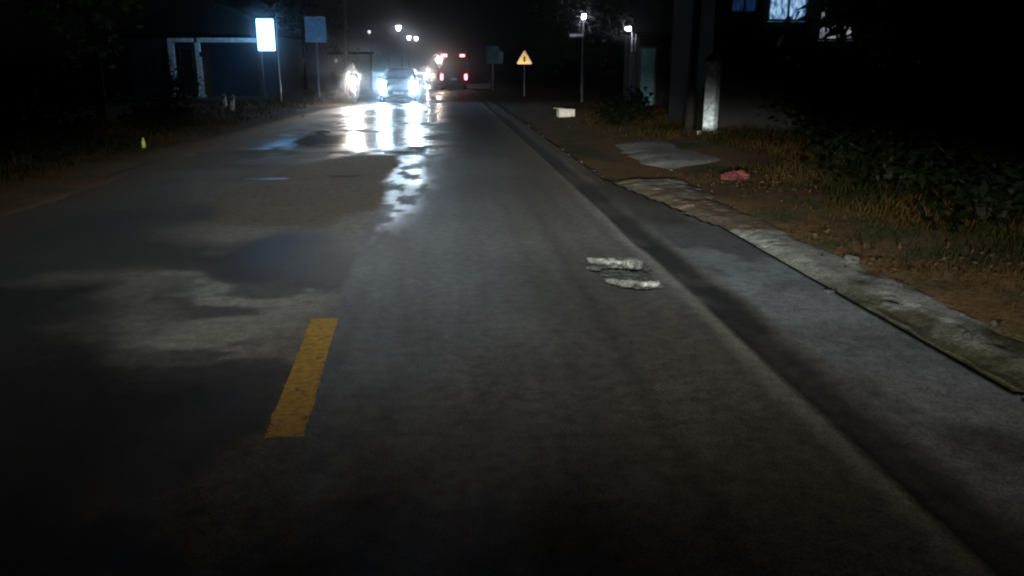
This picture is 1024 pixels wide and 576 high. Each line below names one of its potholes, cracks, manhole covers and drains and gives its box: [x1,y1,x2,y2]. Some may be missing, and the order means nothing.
pothole [583,257,665,291]
